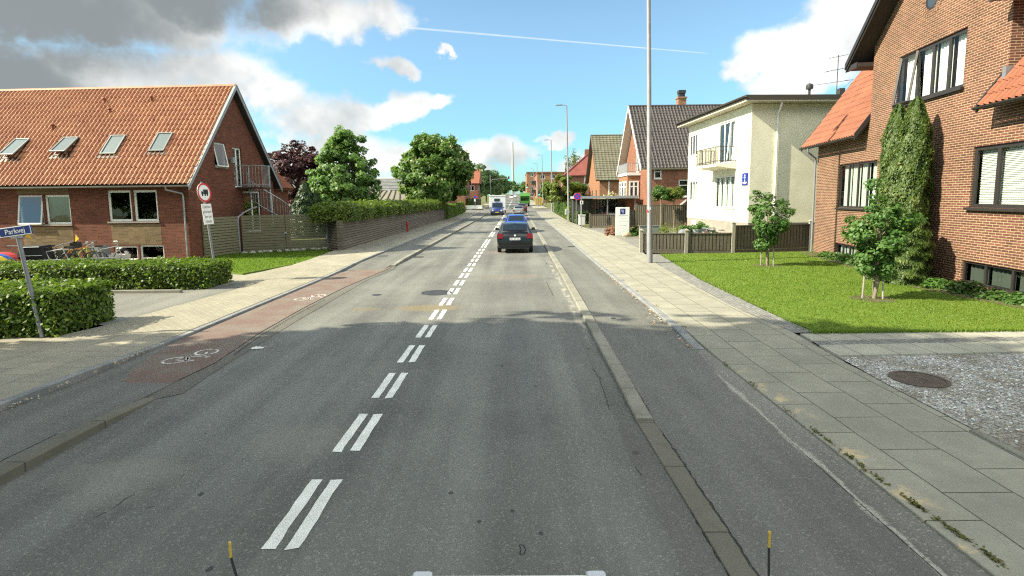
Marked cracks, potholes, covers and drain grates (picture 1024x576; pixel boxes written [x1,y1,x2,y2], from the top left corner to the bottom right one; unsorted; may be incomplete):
manhole cover [888,370,952,388]
